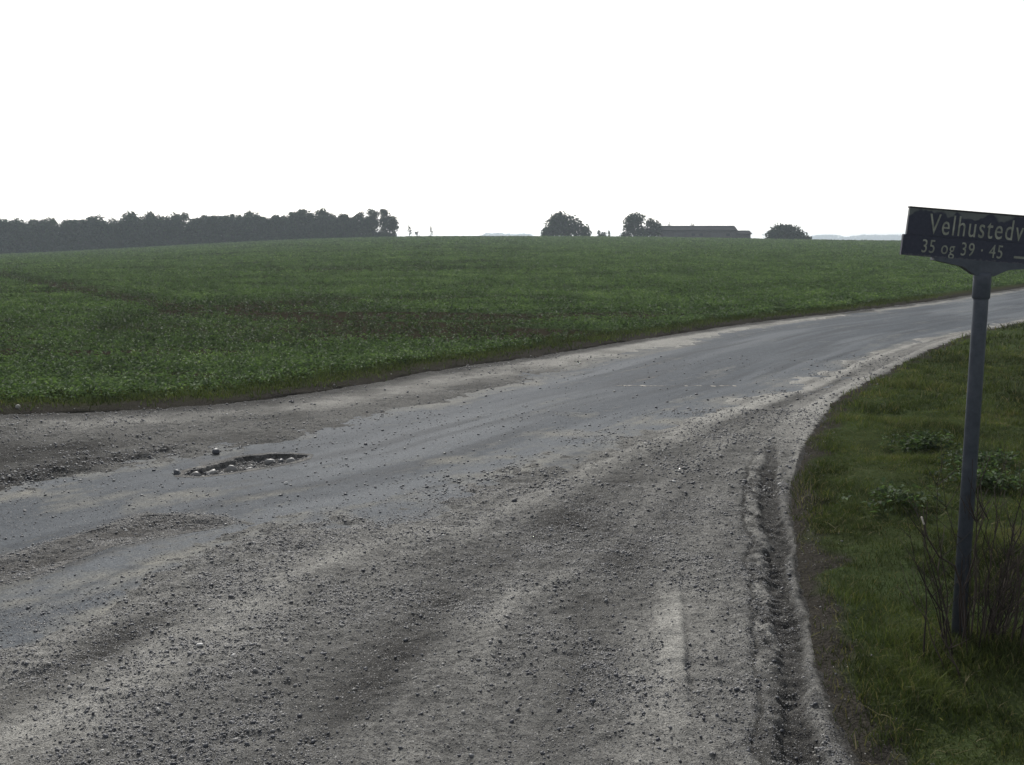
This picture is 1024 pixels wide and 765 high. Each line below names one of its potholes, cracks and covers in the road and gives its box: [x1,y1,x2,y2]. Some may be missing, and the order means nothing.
pothole [174,452,313,477]
